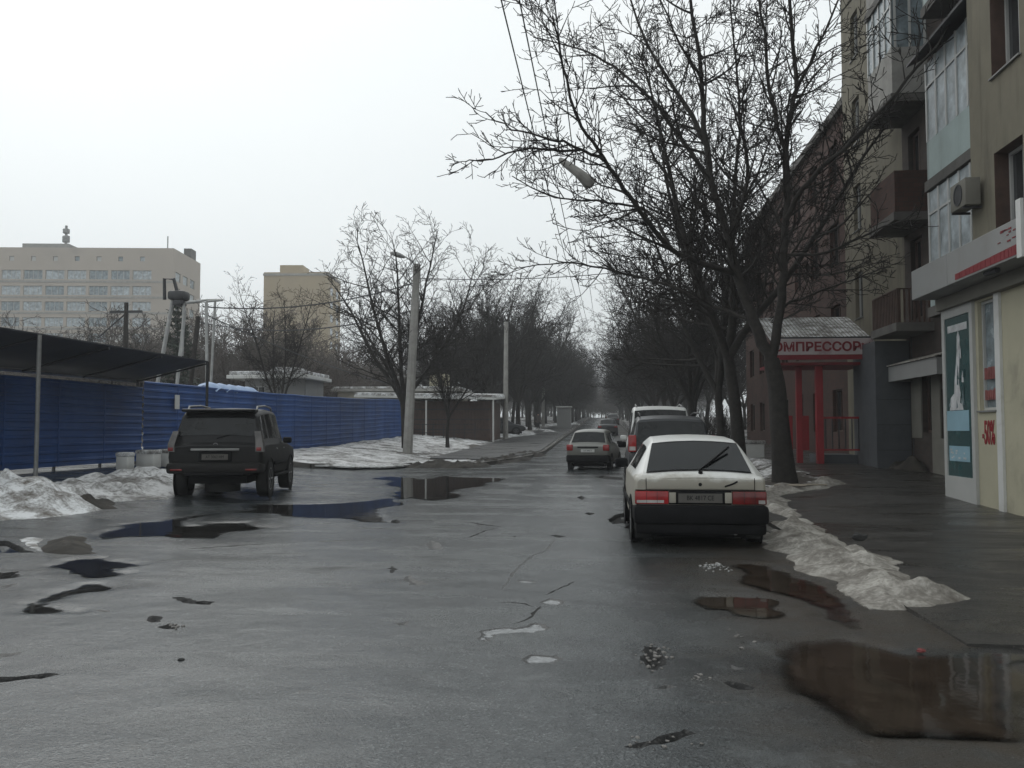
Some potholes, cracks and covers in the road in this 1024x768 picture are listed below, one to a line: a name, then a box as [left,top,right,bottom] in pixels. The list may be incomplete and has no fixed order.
crack [499,540,573,624]
pothole [625,729,696,749]
pothole [640,646,667,670]
pothole [0,673,59,683]
pothole [172,597,214,605]
